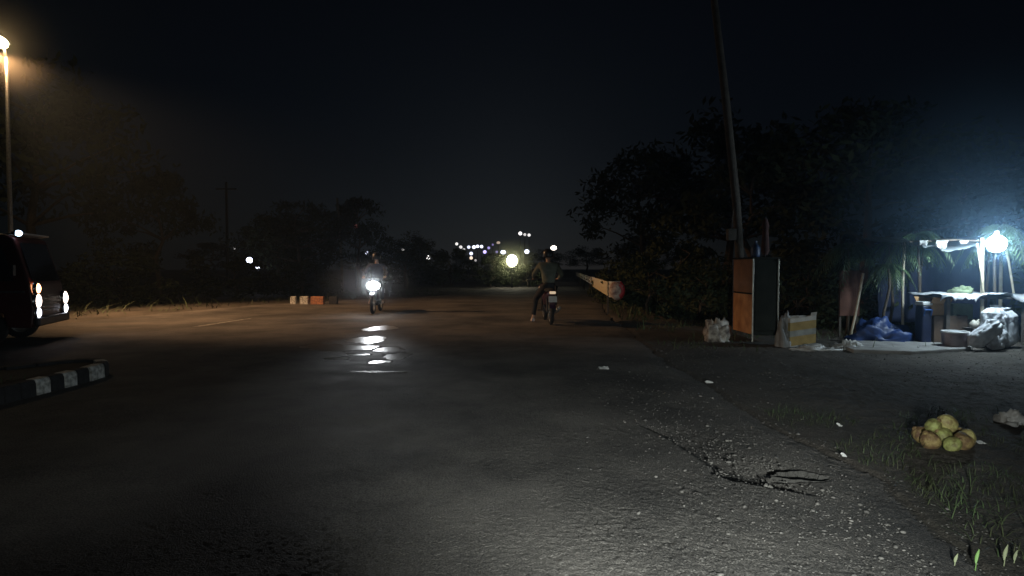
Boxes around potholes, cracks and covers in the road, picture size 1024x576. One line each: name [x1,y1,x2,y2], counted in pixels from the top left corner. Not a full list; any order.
pothole [770,471,834,483]
crack [684,449,758,484]
